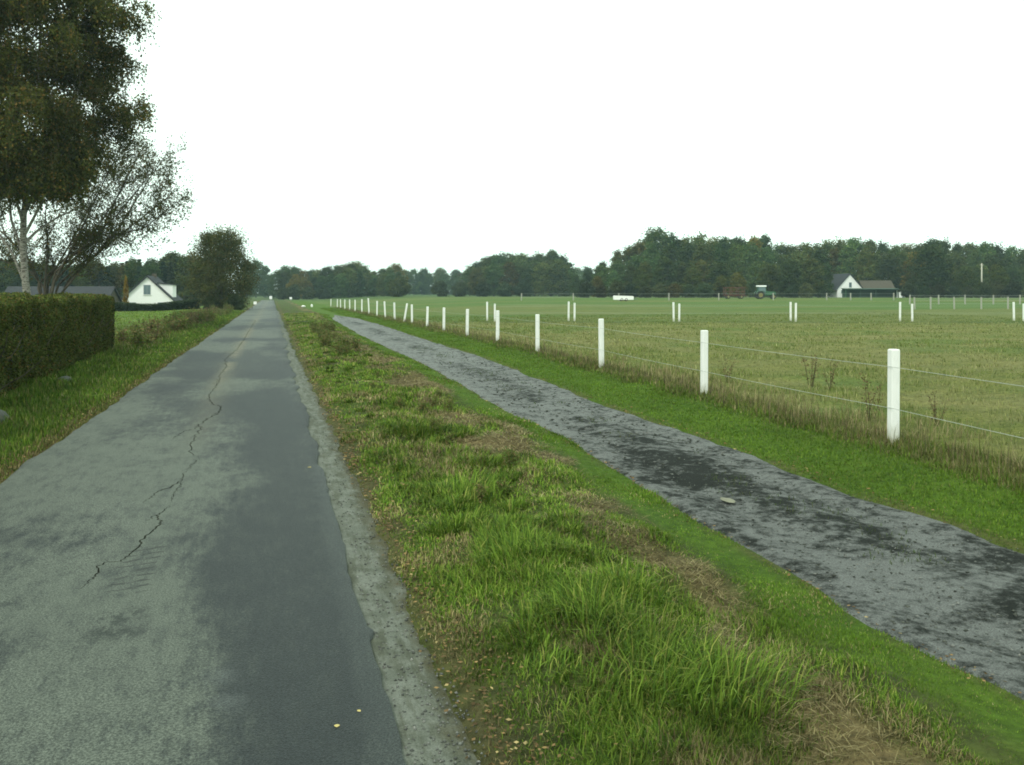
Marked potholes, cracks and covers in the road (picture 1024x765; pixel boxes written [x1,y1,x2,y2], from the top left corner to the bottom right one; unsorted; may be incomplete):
crack [80,320,256,589]
